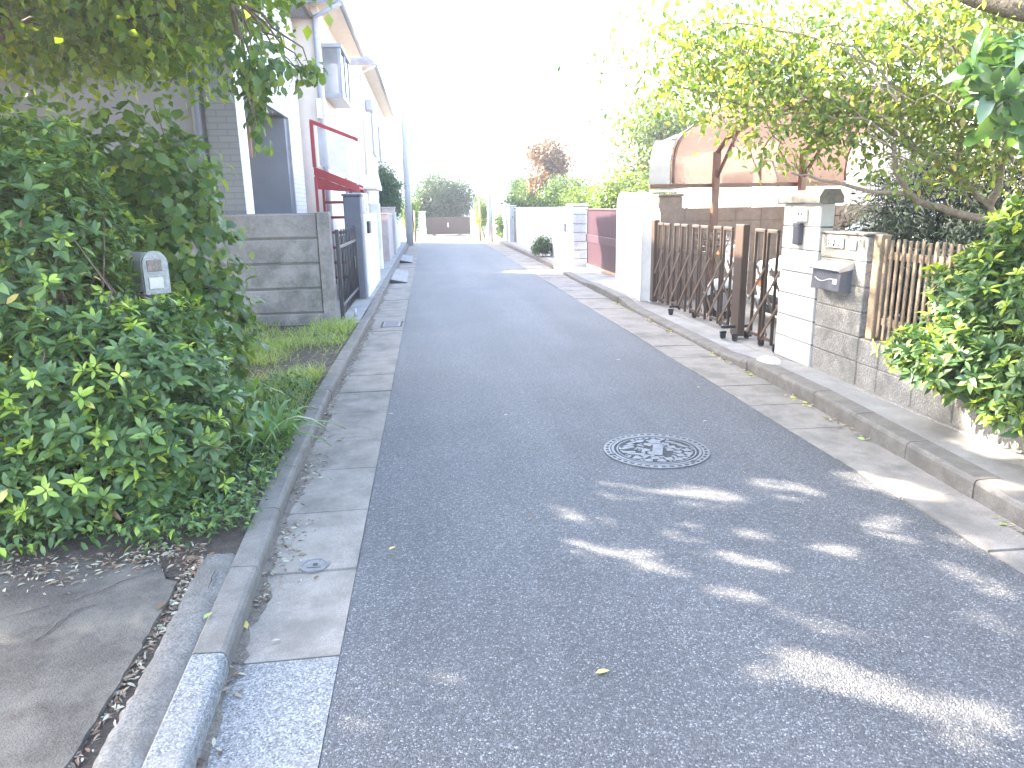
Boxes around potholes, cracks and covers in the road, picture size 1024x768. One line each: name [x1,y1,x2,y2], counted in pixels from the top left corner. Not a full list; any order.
crack [0,569,155,640]
manhole cover [604,433,710,469]
utility cover [299,558,329,574]
